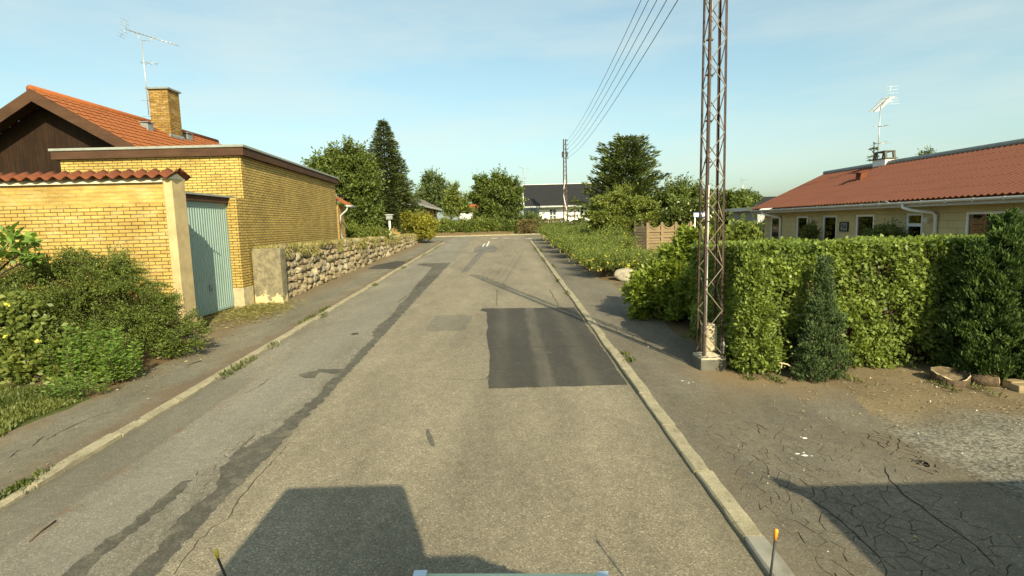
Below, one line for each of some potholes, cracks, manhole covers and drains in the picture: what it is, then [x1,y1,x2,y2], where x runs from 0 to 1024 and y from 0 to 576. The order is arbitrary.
crack [175,436,288,573]
crack [687,413,1019,576]
crack [4,407,128,460]
